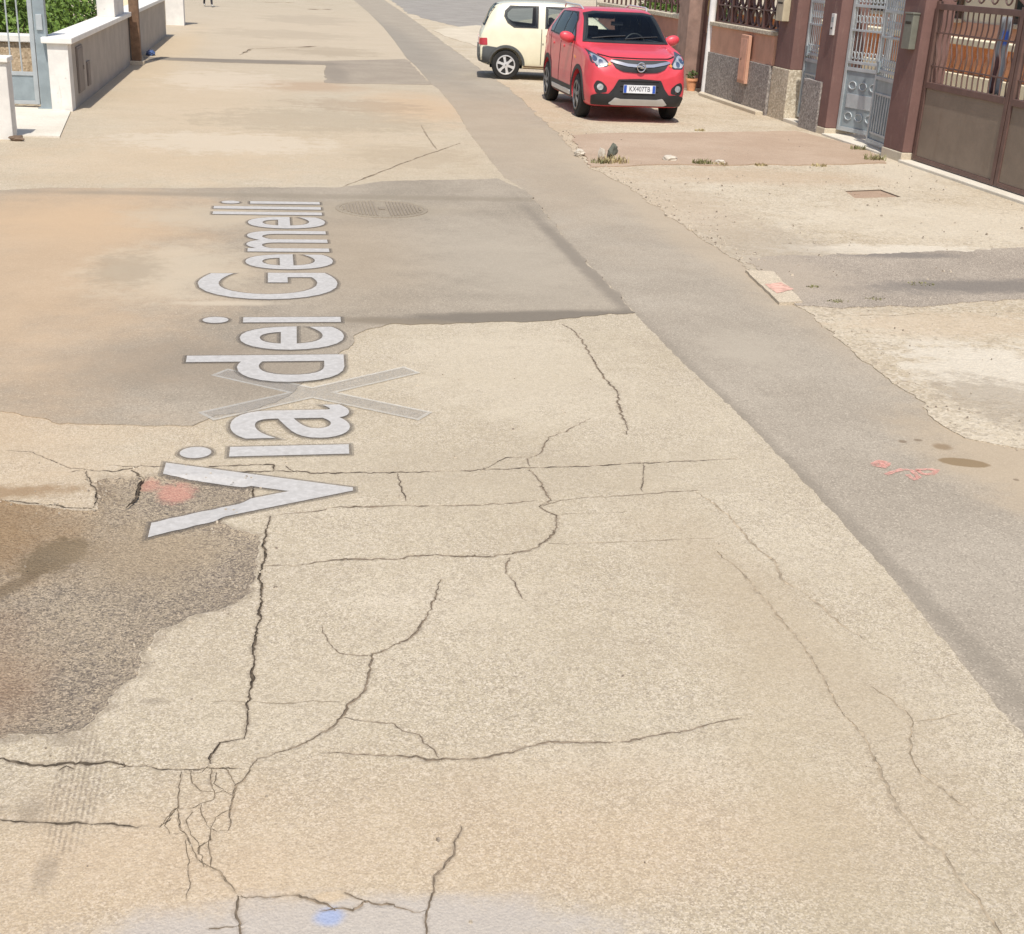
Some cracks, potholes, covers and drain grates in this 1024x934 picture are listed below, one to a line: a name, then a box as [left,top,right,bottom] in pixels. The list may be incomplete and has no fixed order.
crack [343,125,460,187]
crack [563,325,628,434]
manhole cover [846,190,900,198]
manhole cover [335,200,428,218]
crack [0,418,1002,934]
